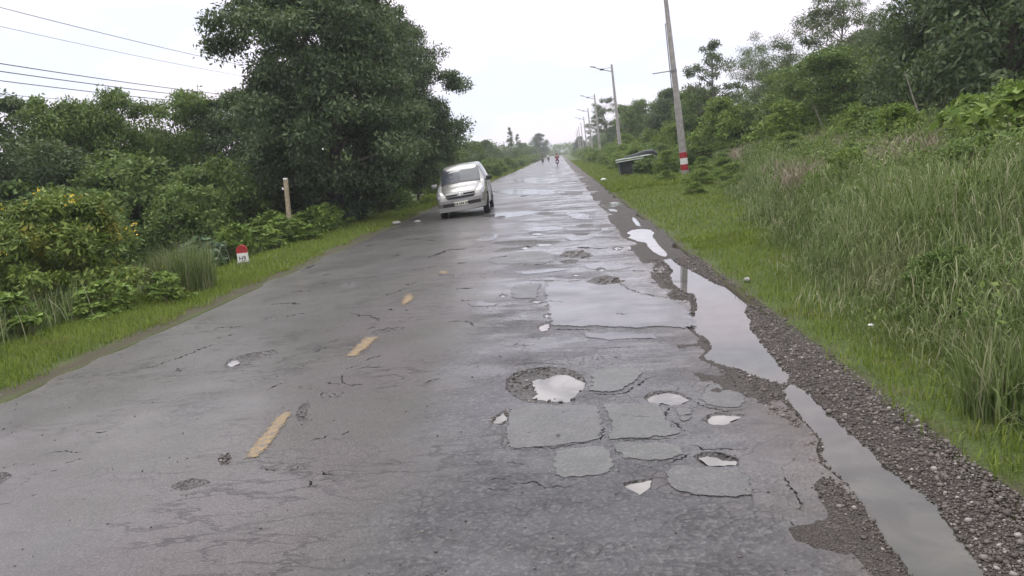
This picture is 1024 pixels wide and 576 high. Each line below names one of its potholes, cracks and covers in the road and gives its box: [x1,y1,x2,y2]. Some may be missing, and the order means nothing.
pothole [295,401,310,422]
pothole [505,367,587,405]
crack [784,477,804,524]
pothole [643,390,692,406]
crack [624,401,746,462]
pothole [619,478,653,495]
pothole [701,412,745,425]
crack [139,326,240,383]
pothole [693,451,739,467]
crack [578,377,651,397]
pothole [171,478,211,491]
